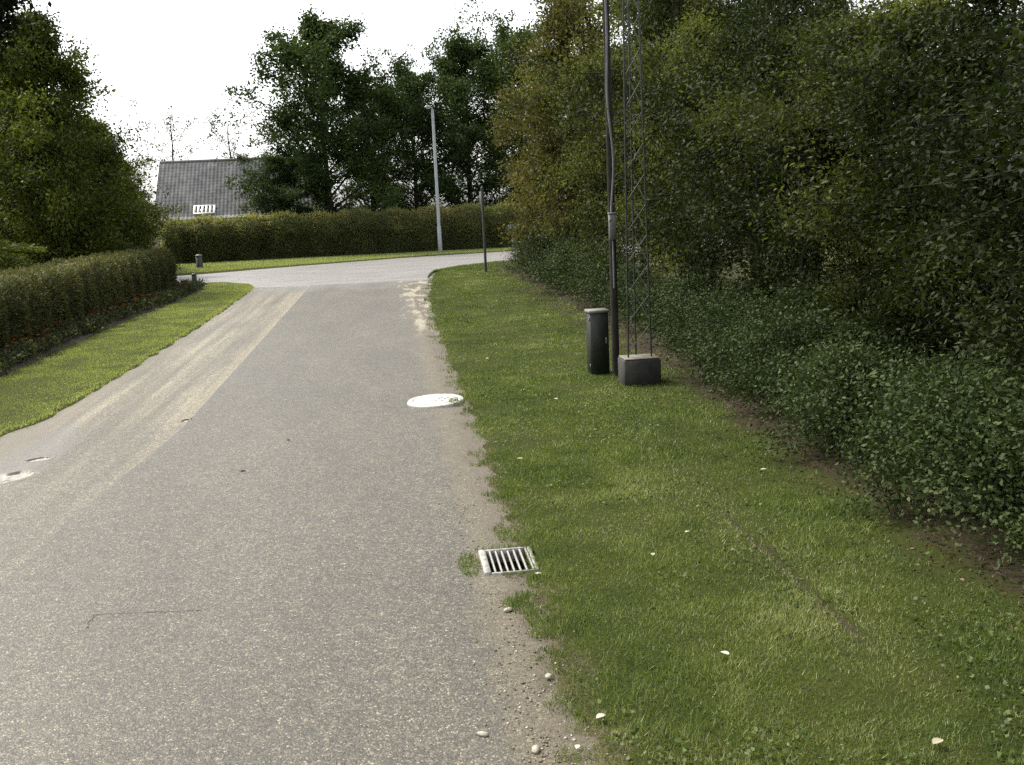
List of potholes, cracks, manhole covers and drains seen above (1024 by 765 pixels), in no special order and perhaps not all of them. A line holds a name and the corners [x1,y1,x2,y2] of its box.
drain grate [478,547,539,576]
pothole [0,468,46,485]
manhole cover [407,394,464,408]
